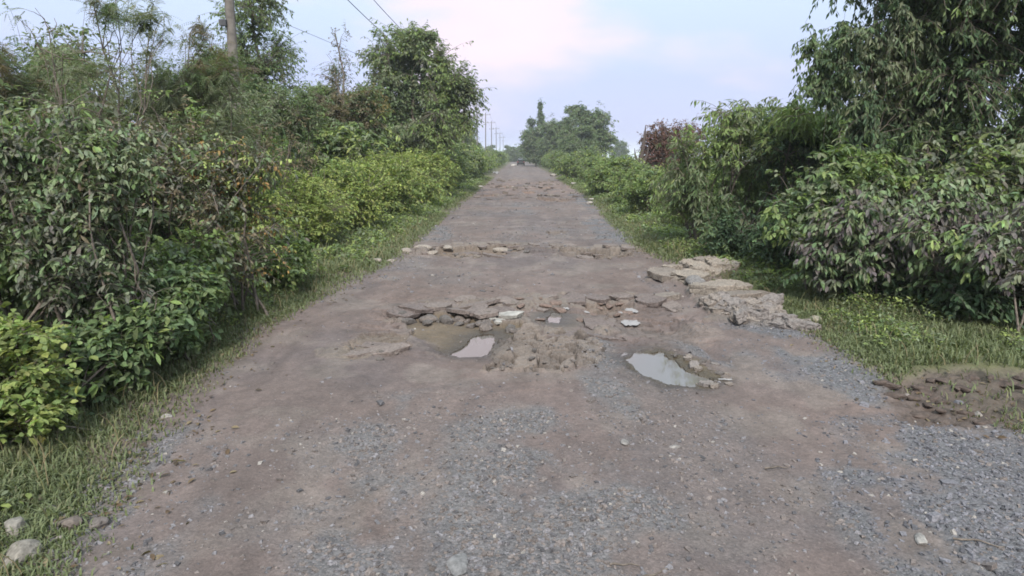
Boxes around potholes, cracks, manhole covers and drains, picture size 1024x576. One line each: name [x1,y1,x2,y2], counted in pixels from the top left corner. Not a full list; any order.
pothole [557,246,637,260]
pothole [528,305,592,332]
pothole [416,242,525,260]
pothole [582,299,637,321]
pothole [406,310,530,359]
pothole [618,344,742,392]
